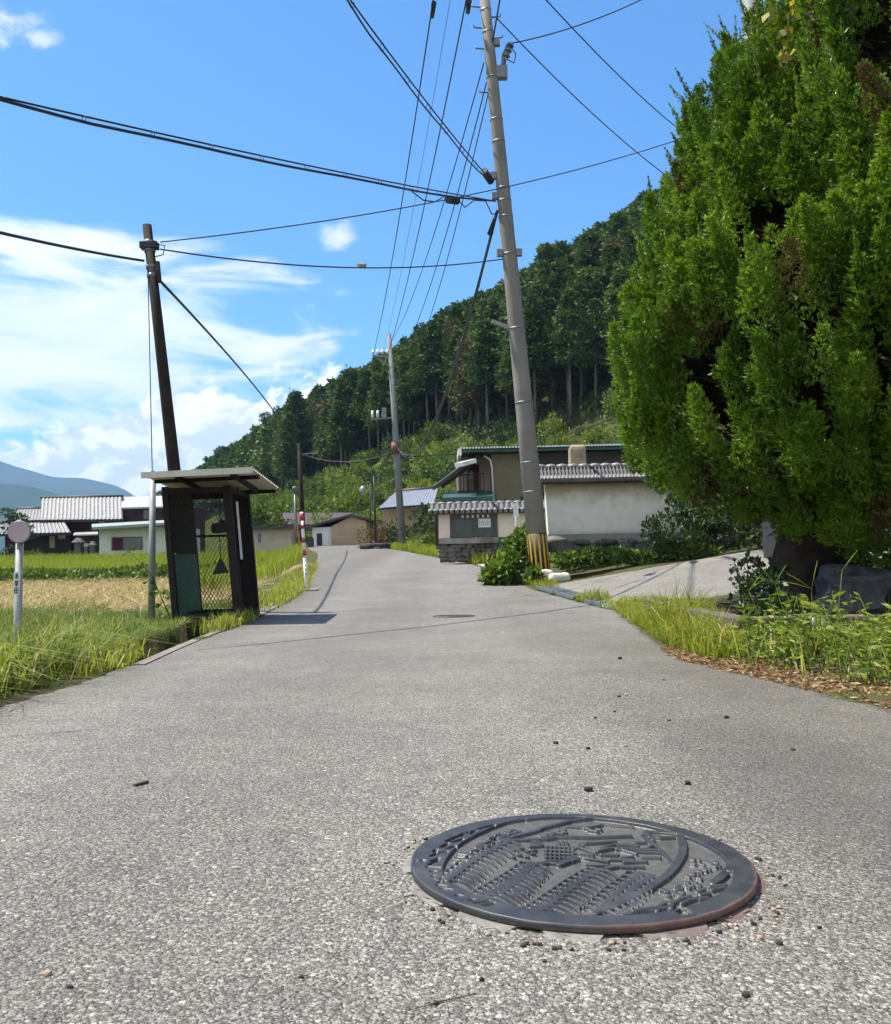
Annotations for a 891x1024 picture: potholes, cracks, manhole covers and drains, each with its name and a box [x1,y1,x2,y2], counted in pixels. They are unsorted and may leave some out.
manhole cover [400,814,767,942]
